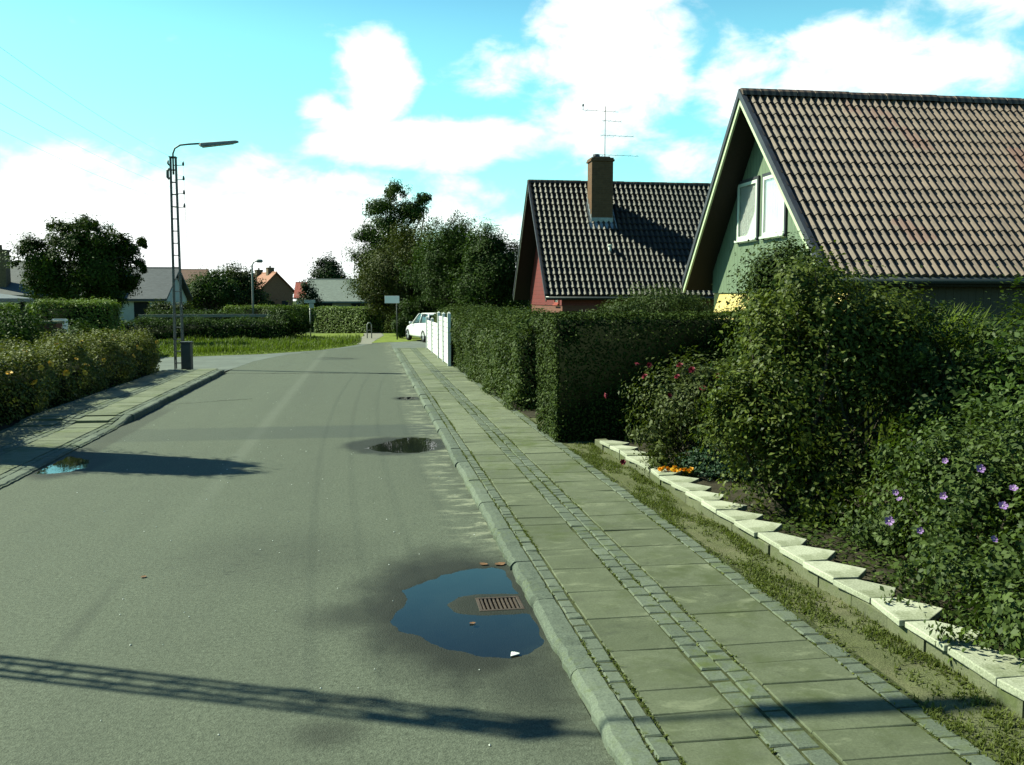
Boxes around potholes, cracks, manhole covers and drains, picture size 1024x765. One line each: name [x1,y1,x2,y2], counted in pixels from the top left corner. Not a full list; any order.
drain grate [475,596,525,612]
